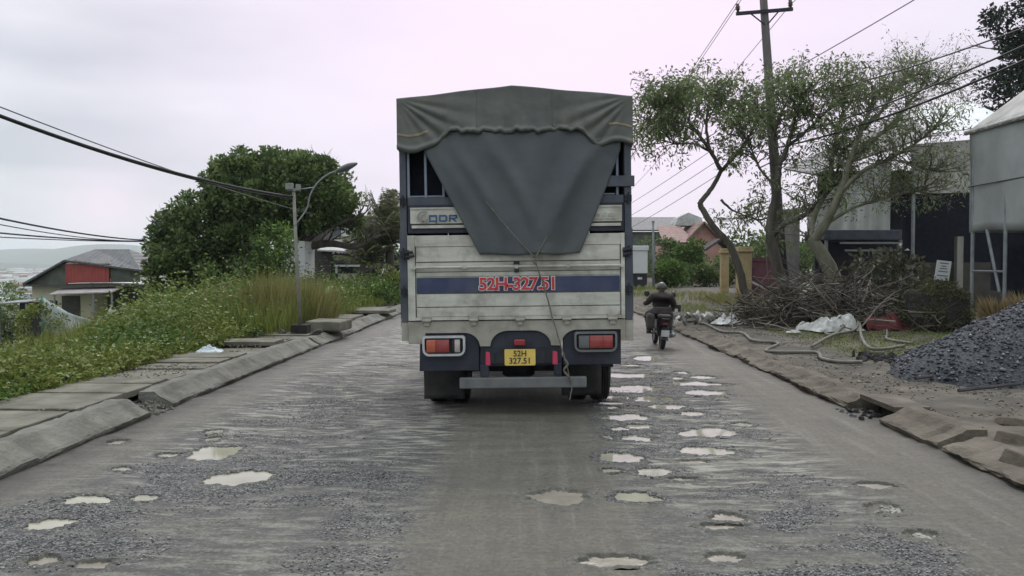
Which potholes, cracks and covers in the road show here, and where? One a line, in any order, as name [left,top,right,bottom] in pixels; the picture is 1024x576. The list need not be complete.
pothole [116,492,169,504]
pothole [628,465,683,479]
pothole [664,444,761,458]
pothole [668,387,743,398]
pothole [169,442,264,465]
pothole [504,484,606,512]
pothole [602,489,679,505]
pothole [840,480,911,492]
pothole [8,515,97,534]
pothole [43,556,132,572]
pothole [183,467,293,491]
pothole [46,493,134,507]
